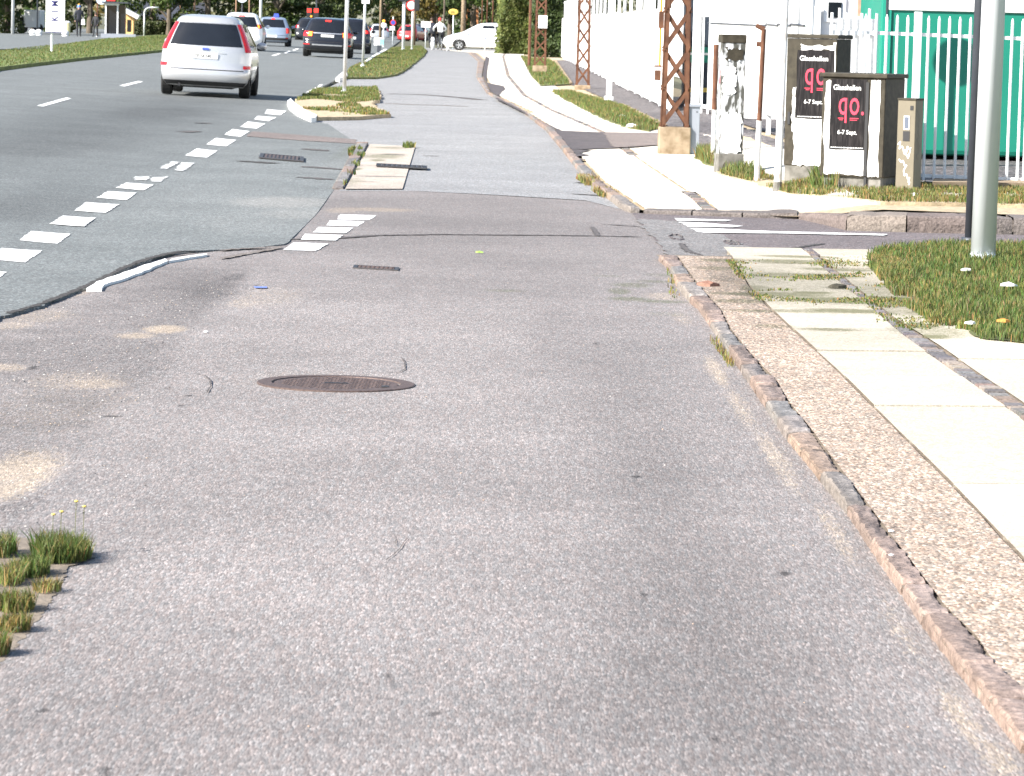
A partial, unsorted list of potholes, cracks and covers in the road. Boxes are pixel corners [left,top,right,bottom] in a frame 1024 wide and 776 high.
manhole cover [257,375,415,392]
